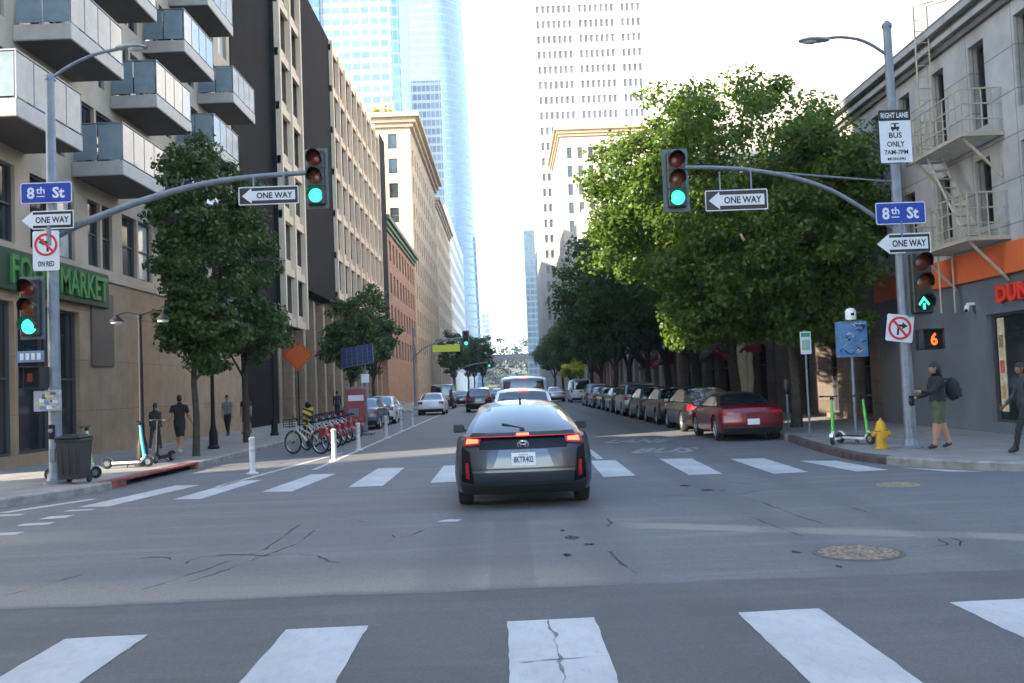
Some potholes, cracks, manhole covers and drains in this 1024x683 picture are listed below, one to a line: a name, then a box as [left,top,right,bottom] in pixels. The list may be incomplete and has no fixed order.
manhole cover [812,544,907,561]
crack [134,524,338,589]
crack [679,482,826,536]
crack [607,551,637,573]
